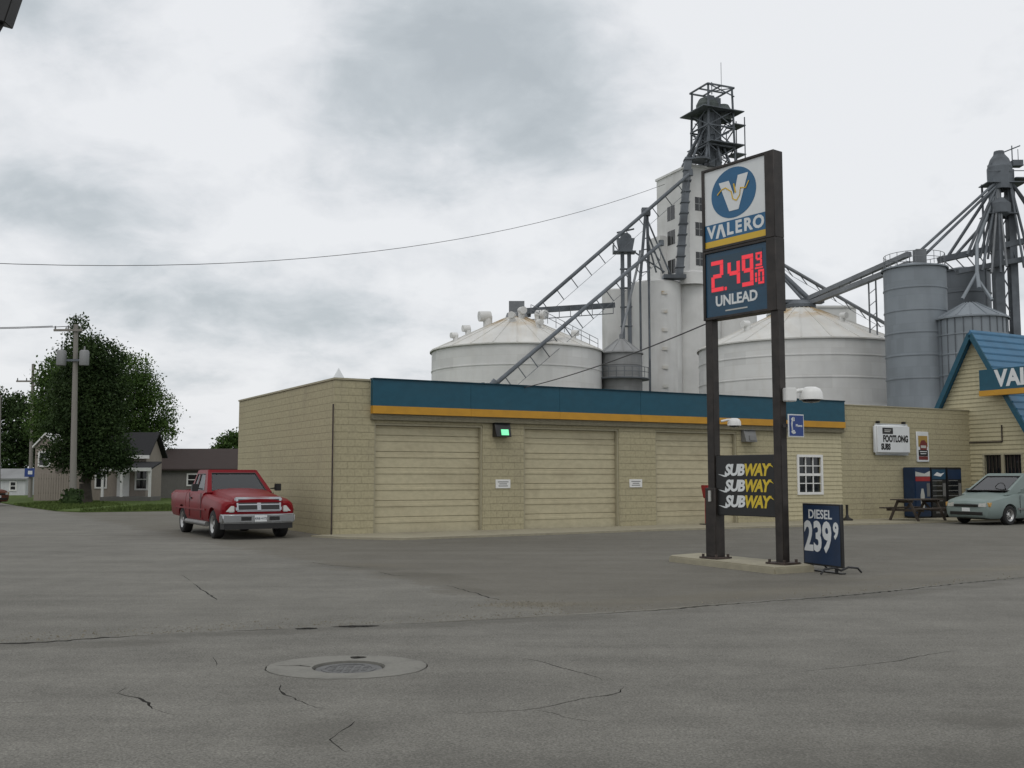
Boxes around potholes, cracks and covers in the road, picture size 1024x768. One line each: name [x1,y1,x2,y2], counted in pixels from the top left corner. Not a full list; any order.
crack [500,687,624,720]
manhole cover [266,655,427,679]
crack [117,690,169,714]
